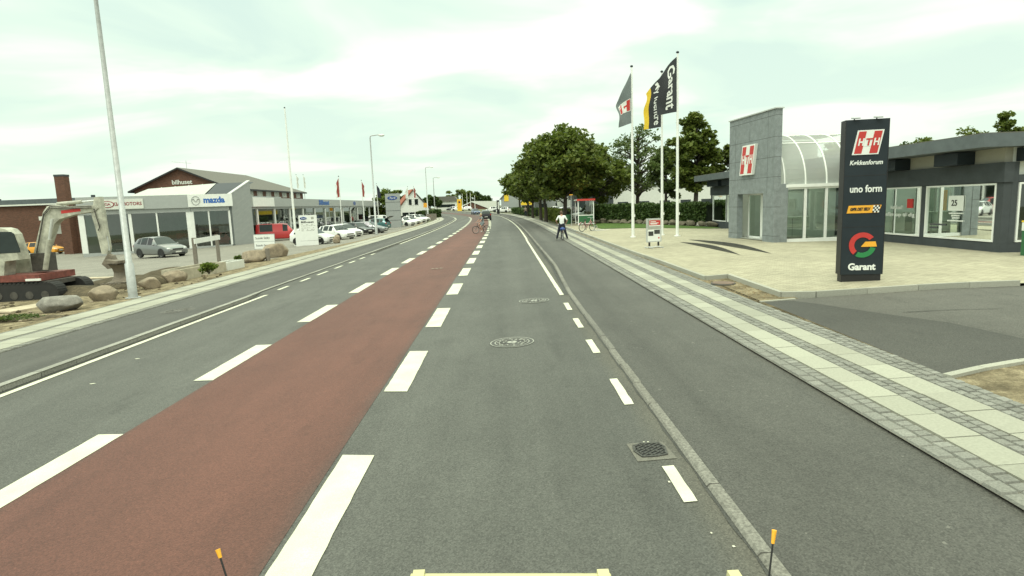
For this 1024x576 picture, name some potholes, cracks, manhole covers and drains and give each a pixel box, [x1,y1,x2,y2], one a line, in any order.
manhole cover [490,337,534,347]
drain grate [627,442,677,461]
